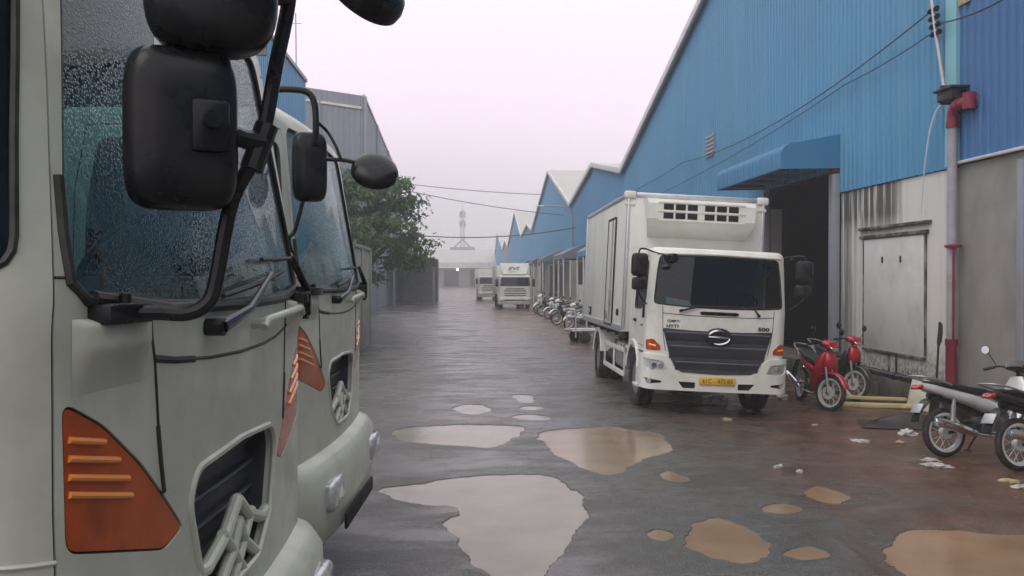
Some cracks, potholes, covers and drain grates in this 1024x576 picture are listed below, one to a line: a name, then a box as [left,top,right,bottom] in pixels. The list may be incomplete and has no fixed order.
pothole [659,471,690,482]
pothole [682,517,772,564]
pothole [881,528,1024,576]
pothole [782,546,831,560]
pothole [804,486,851,504]
pothole [451,404,492,415]
pothole [646,529,675,541]
pothole [761,503,804,514]
pothole [391,424,525,448]
pothole [536,426,673,475]
pothole [377,474,591,576]
